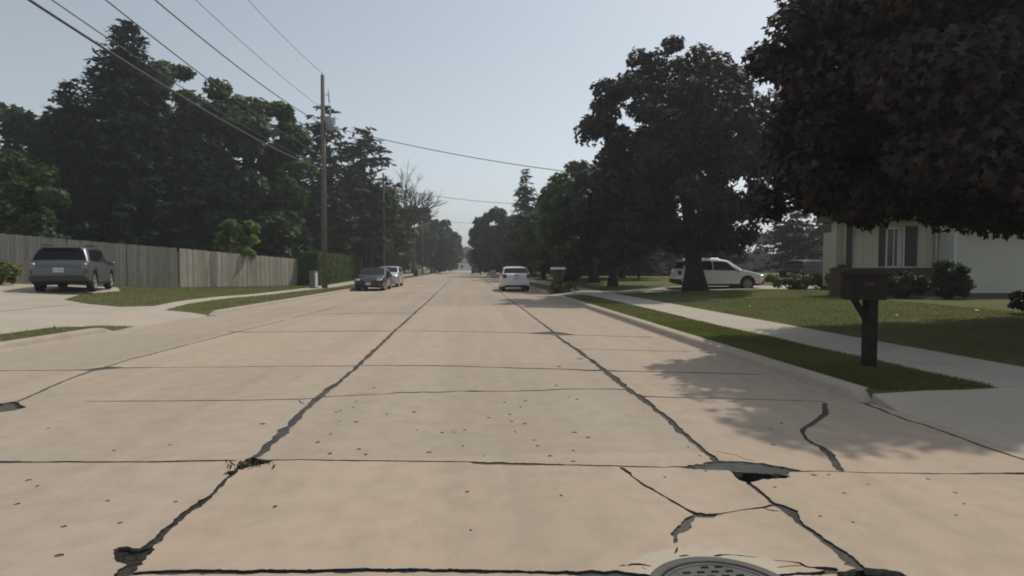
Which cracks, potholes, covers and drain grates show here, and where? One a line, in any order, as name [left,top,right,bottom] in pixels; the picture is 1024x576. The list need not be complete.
pothole [681,461,800,484]
pothole [113,546,155,568]
pothole [224,457,272,476]
manhole cover [650,557,780,576]
pothole [0,401,27,412]
crack [620,451,813,568]
